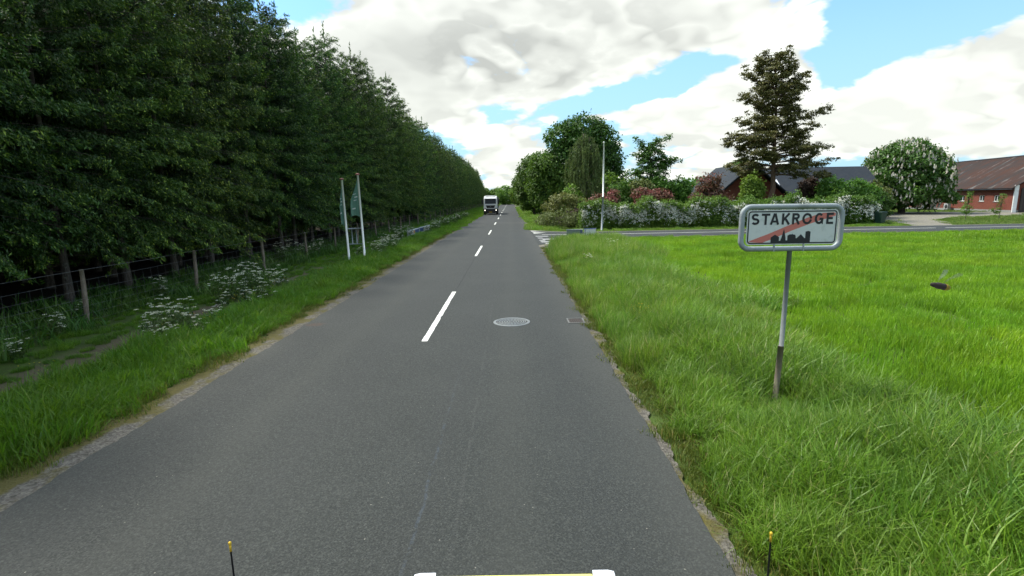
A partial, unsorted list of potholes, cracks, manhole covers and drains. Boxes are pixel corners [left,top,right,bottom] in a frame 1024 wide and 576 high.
manhole cover [493,317,530,327]
